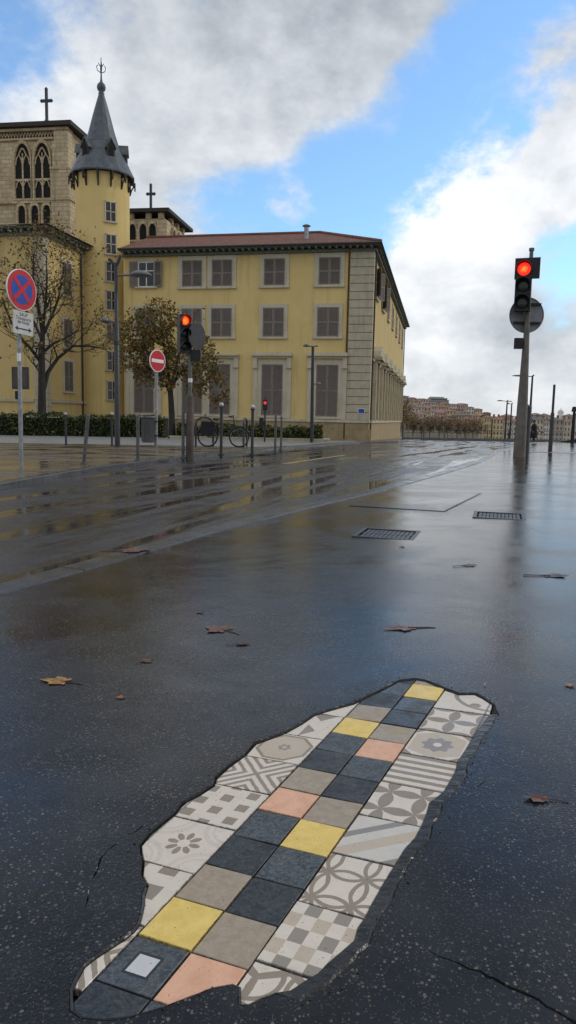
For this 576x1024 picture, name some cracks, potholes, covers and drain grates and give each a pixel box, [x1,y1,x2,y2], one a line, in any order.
crack [428,950,576,1024]
pothole [67,677,499,1024]
crack [85,825,144,908]
